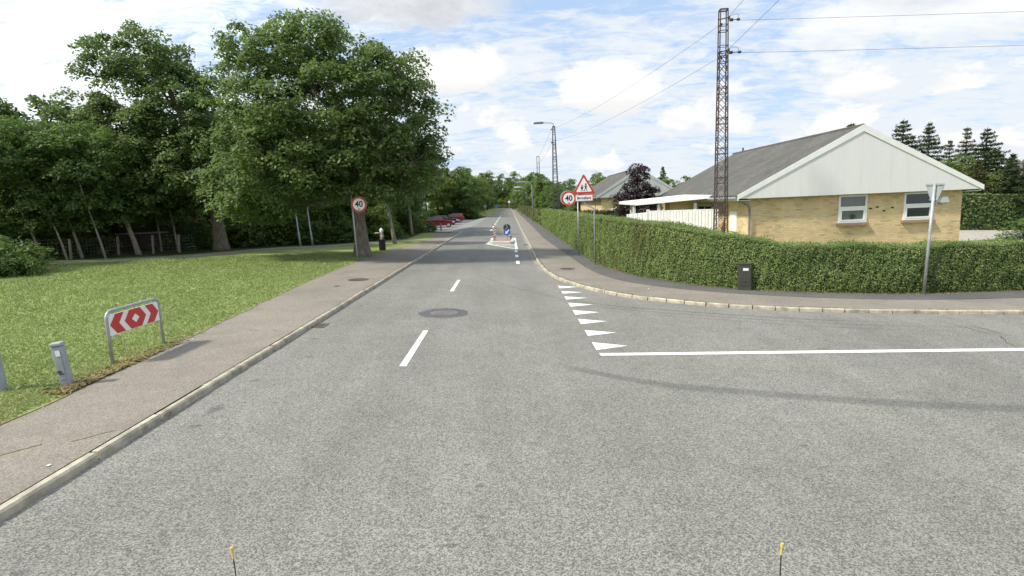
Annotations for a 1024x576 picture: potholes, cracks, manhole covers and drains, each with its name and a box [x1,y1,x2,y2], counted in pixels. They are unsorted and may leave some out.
manhole cover [418,308,468,318]
